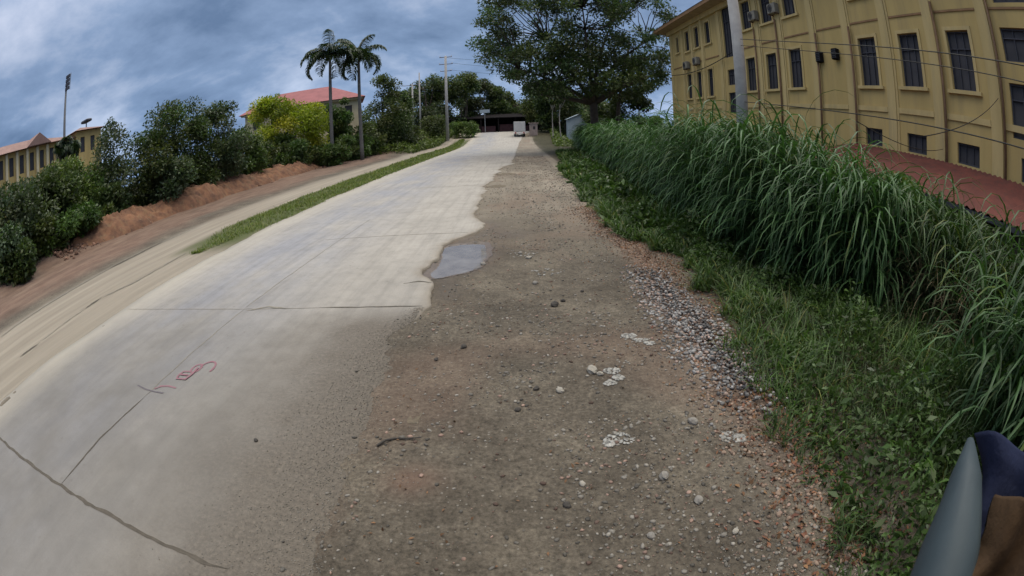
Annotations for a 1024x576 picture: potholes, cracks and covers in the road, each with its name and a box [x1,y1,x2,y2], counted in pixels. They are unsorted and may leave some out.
pothole [423,241,493,280]
